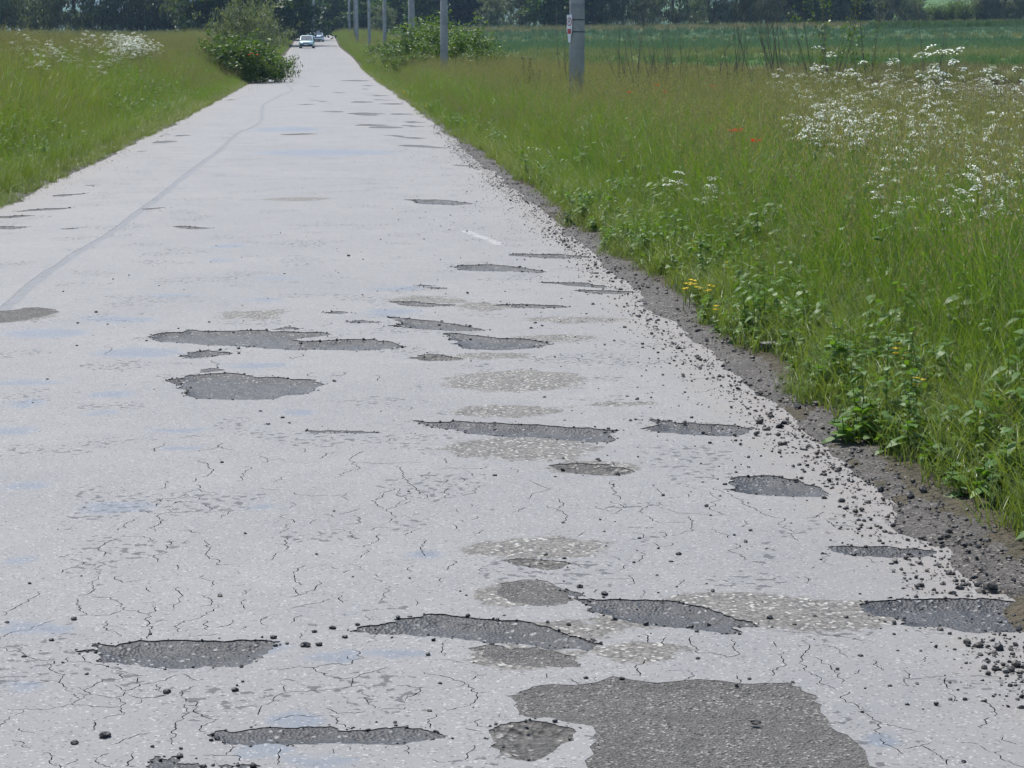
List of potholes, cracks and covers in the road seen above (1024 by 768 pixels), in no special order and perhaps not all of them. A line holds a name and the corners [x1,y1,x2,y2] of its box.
pothole [76,639,280,669]
pothole [828,546,937,558]
crack [0,648,242,768]
pothole [207,726,446,746]
pothole [166,373,324,400]
pothole [446,333,553,350]
pothole [489,720,576,762]
crack [0,436,252,639]
crack [515,469,1023,767]
pothole [0,307,59,323]
pothole [859,598,1023,634]
crack [258,637,500,764]
